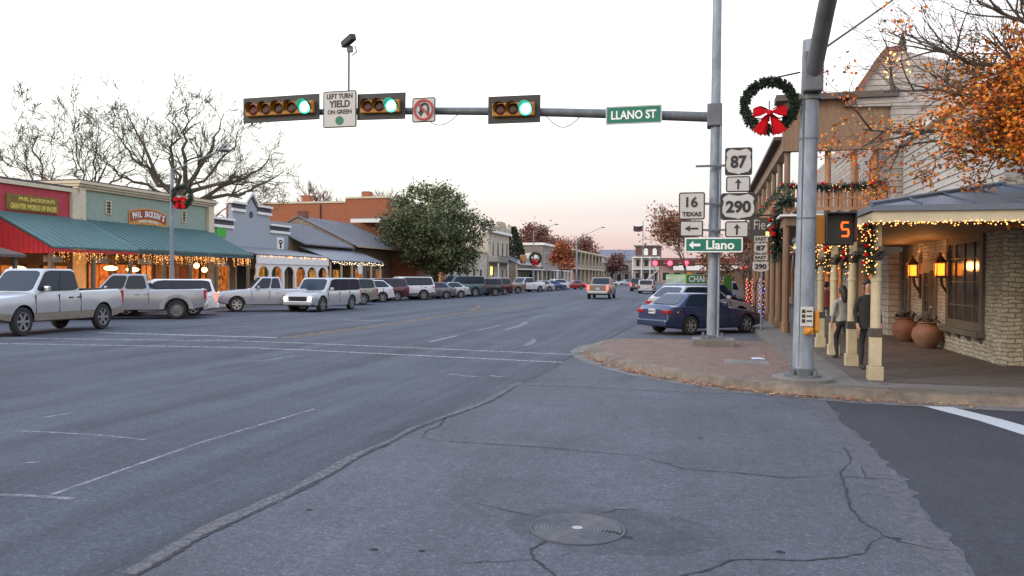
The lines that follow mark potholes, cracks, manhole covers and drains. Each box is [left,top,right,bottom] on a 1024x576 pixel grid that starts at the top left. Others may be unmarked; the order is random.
crack [136,324,829,575]
manhole cover [529,513,626,545]
crack [679,447,955,576]
